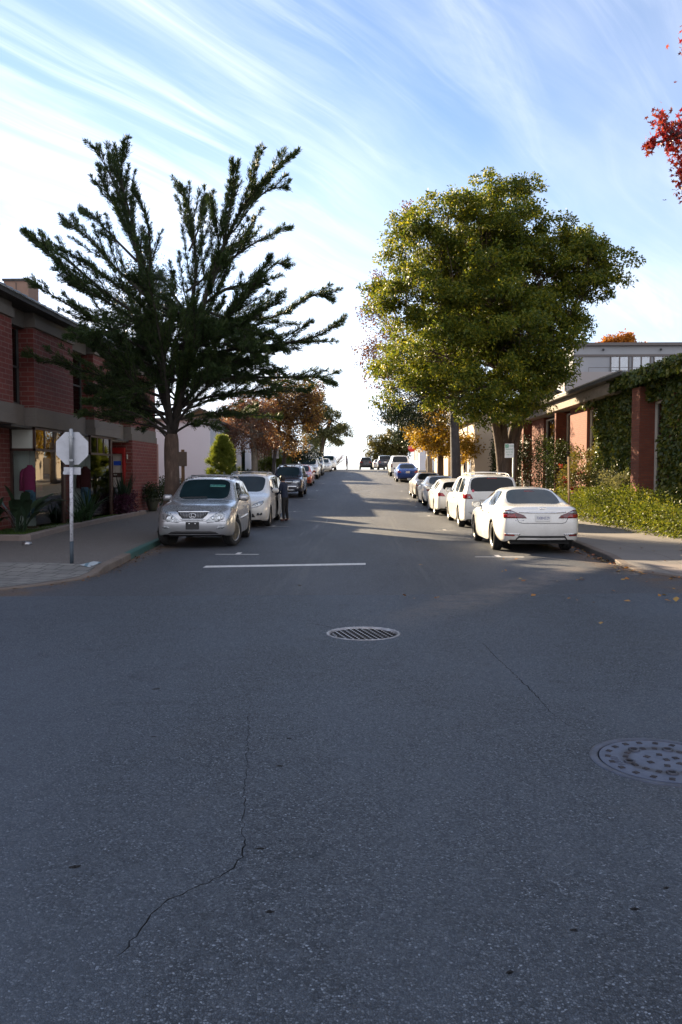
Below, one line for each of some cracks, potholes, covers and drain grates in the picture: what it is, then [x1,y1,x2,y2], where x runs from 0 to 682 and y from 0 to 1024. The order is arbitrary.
crack [485,645,568,725]
crack [119,713,250,955]
manhole cover [589,738,682,788]
